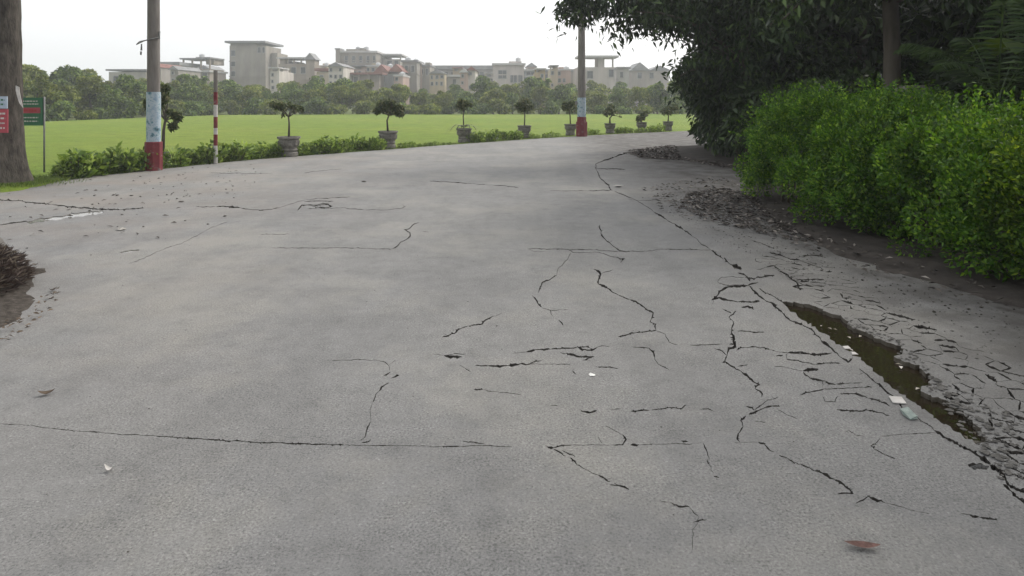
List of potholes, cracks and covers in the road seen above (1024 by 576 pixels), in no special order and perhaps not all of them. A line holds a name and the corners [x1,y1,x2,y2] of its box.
pothole [782,301,987,445]
crack [132,197,401,263]
crack [661,501,707,552]
crack [595,153,626,190]
crack [0,198,143,225]
crack [438,226,1024,520]
crack [335,359,399,443]
